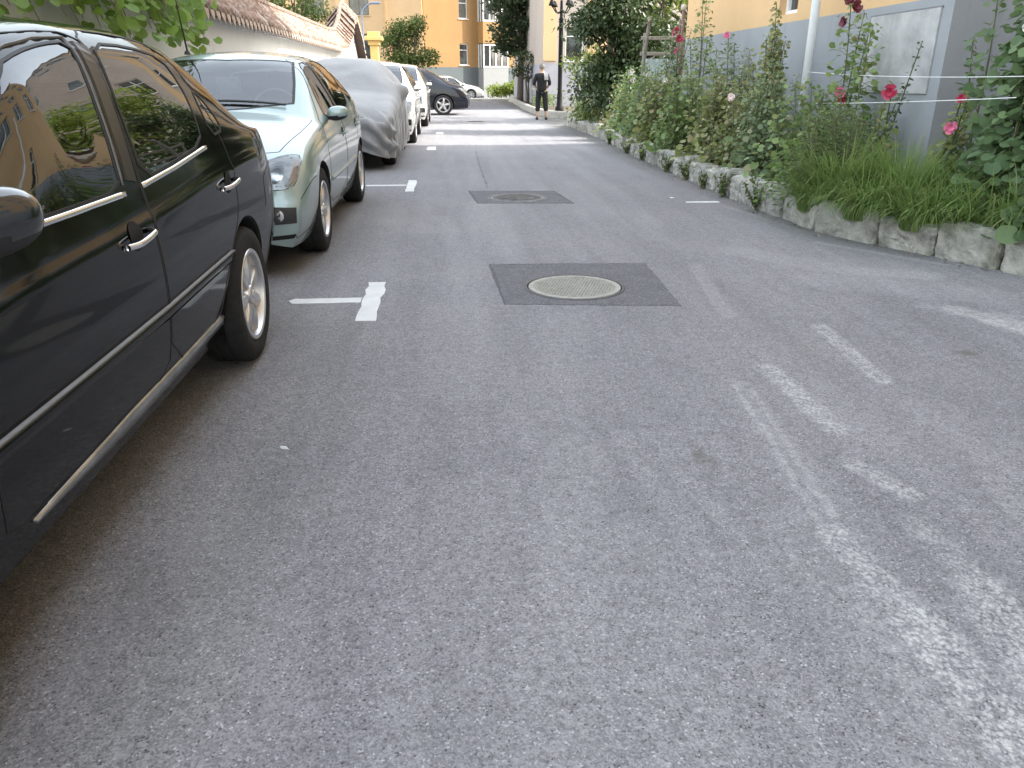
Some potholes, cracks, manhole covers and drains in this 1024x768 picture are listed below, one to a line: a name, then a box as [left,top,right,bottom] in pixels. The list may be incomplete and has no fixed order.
manhole cover [488,193,546,202]
manhole cover [524,275,625,301]
